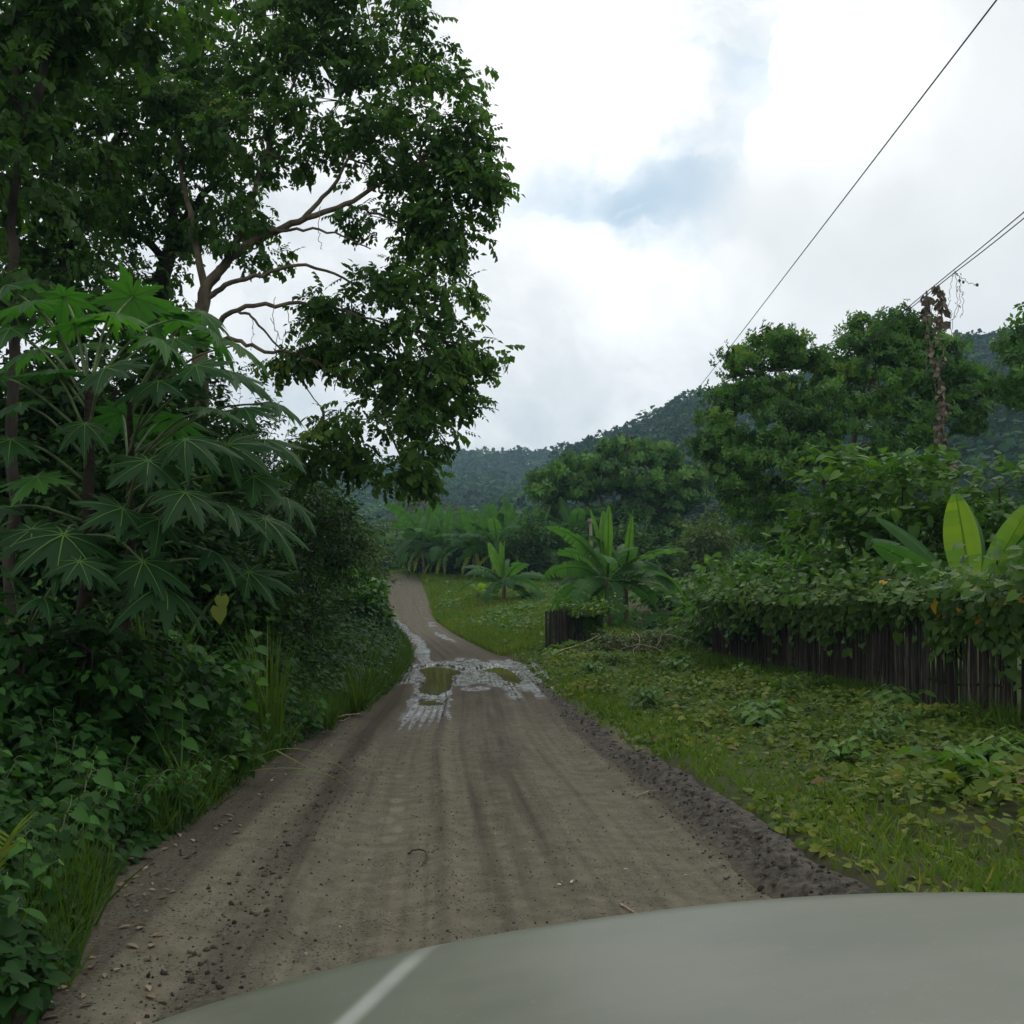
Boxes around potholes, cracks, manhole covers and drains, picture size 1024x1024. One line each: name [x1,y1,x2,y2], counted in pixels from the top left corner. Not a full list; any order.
pothole [472,663,525,684]
pothole [406,697,453,707]
pothole [412,661,467,695]
